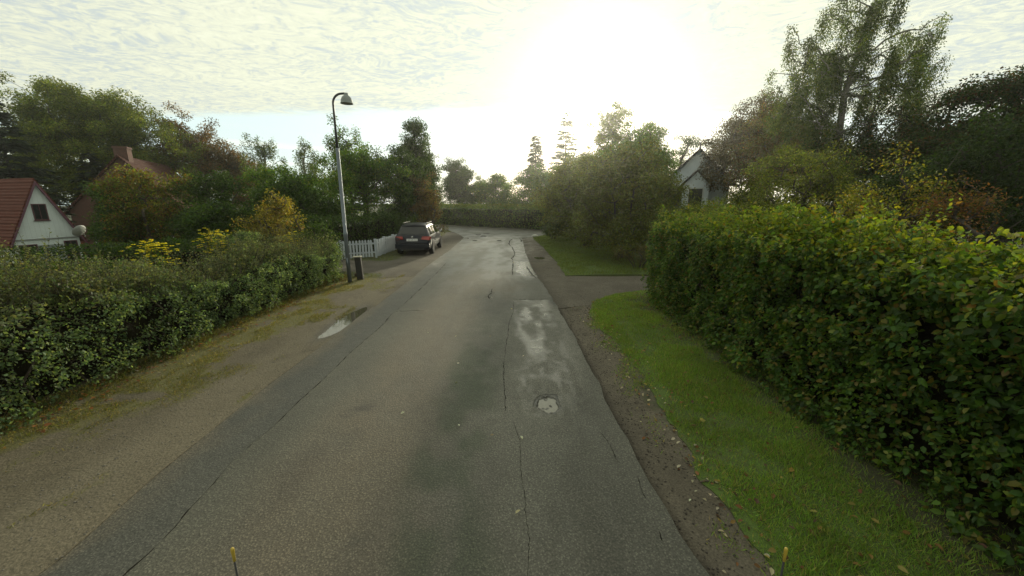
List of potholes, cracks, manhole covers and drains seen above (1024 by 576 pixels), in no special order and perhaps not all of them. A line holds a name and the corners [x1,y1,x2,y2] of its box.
crack [503,299,530,576]
pothole [533,394,562,415]
